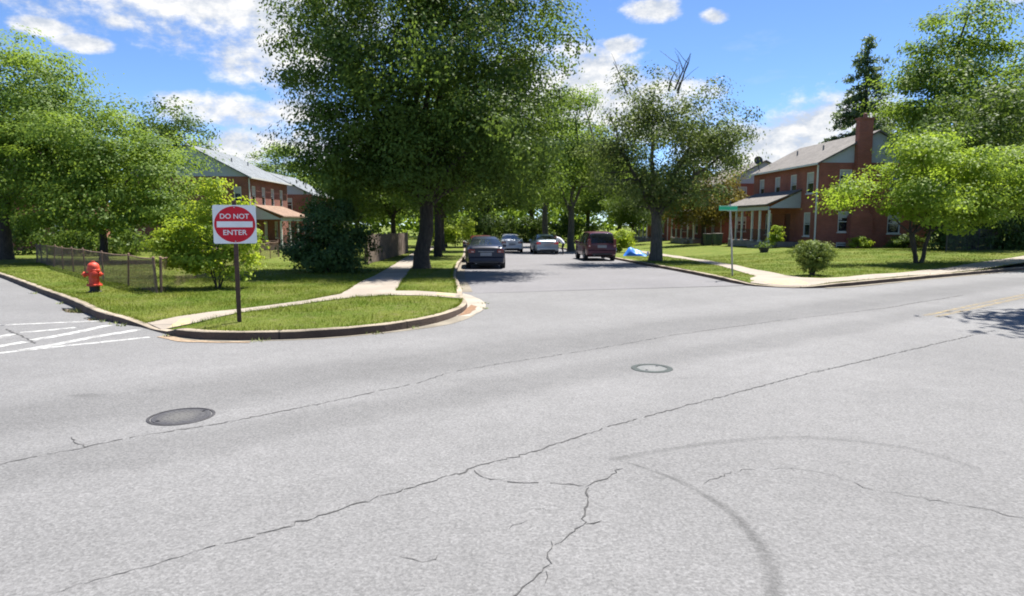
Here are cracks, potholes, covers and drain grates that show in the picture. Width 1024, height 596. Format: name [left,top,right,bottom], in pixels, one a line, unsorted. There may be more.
manhole cover [631,364,673,373]
manhole cover [146,407,216,426]
crack [705,468,1022,518]
crack [474,468,622,596]
